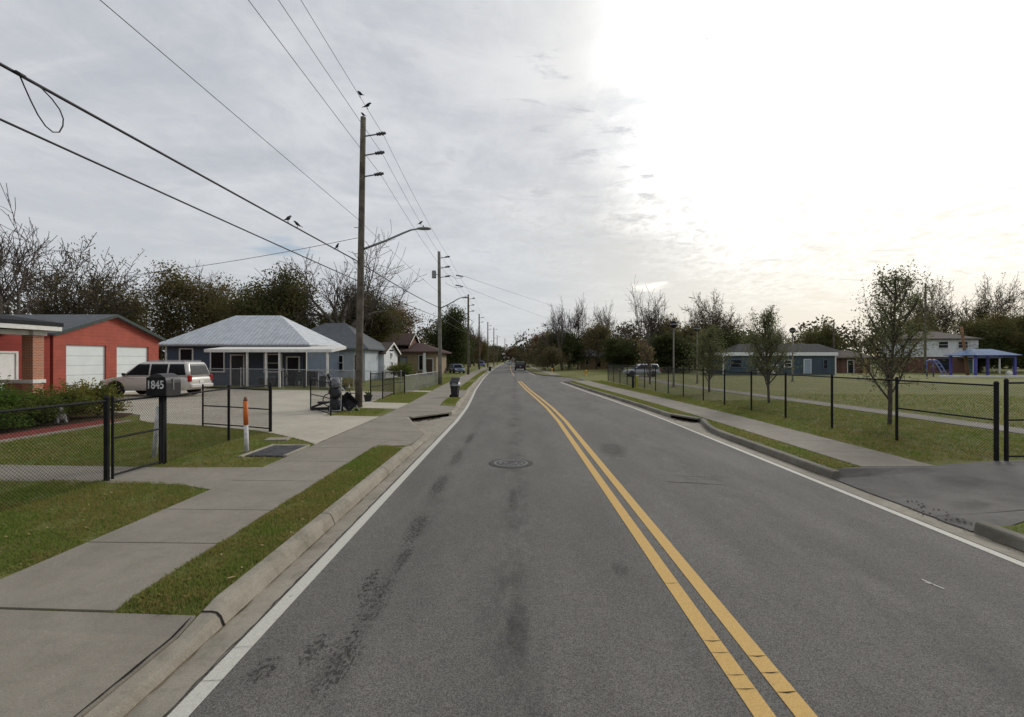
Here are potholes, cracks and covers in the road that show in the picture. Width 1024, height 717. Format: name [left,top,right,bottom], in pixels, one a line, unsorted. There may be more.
manhole cover [489,458,533,468]
drain grate [408,411,452,422]
drain grate [669,413,700,423]
